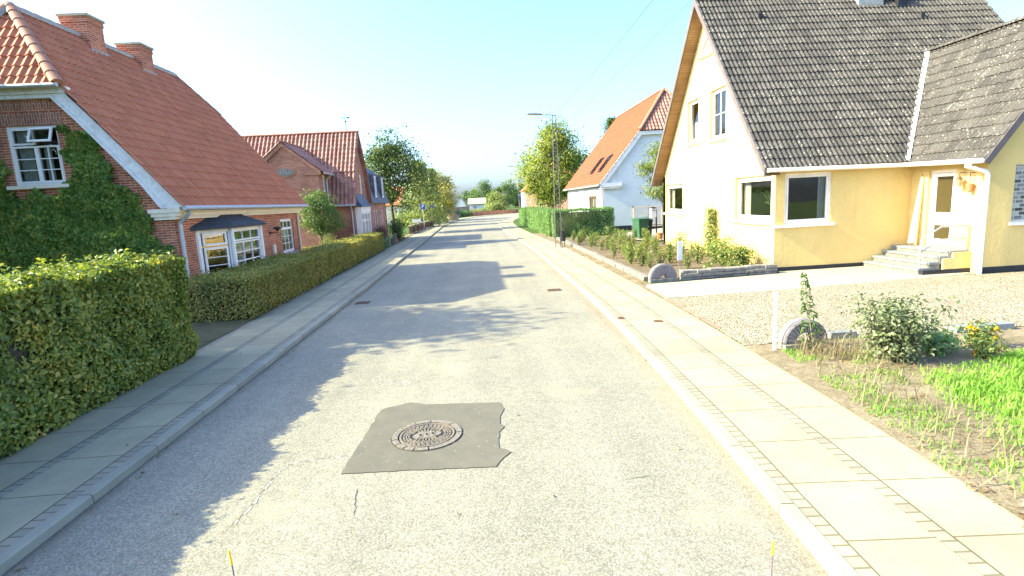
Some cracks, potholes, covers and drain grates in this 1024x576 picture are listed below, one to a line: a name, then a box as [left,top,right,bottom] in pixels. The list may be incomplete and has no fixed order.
crack [229,455,349,527]
manhole cover [391,420,463,452]
